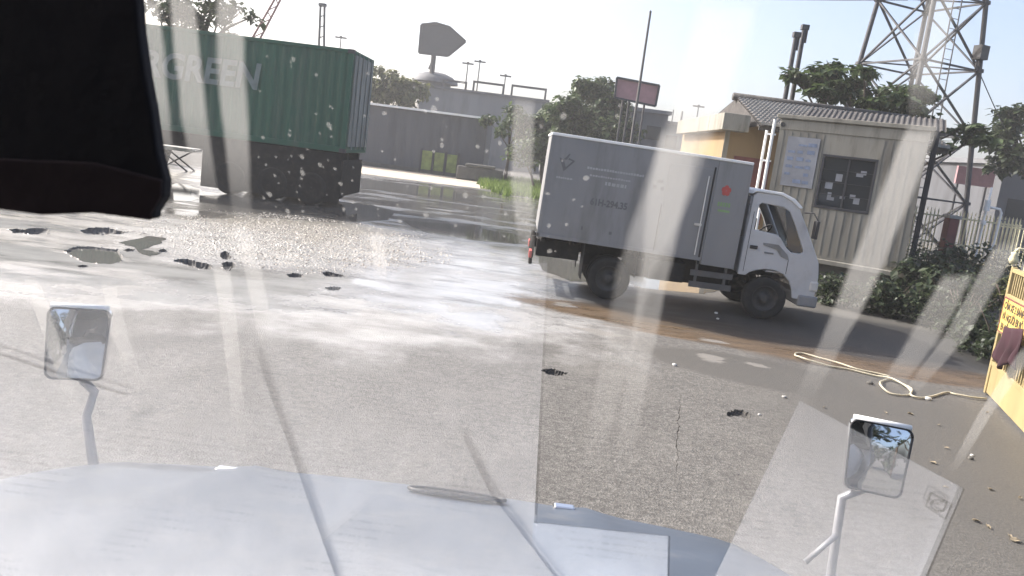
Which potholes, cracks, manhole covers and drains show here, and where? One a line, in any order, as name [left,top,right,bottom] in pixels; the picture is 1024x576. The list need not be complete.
pothole [62,246,124,264]
pothole [726,409,751,419]
pothole [174,258,213,270]
pothole [81,227,126,235]
pothole [541,368,568,376]
